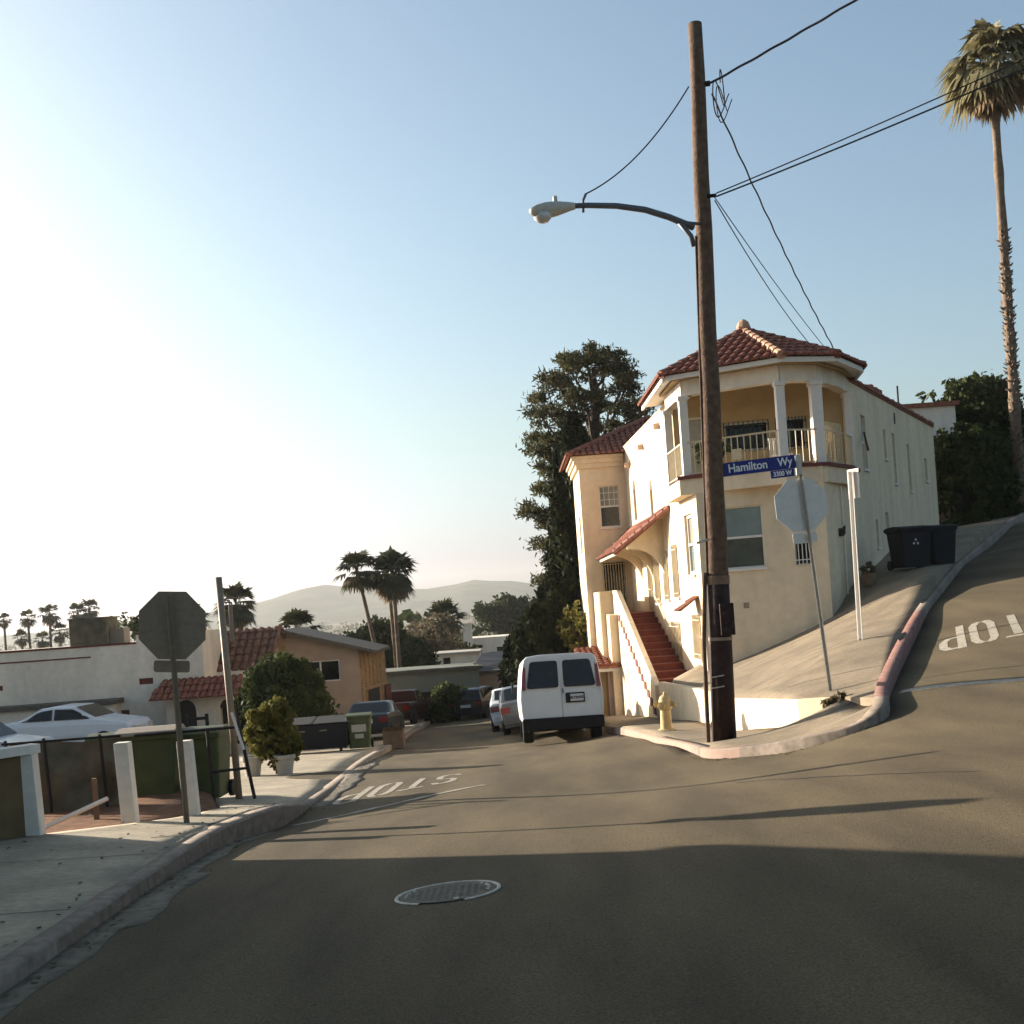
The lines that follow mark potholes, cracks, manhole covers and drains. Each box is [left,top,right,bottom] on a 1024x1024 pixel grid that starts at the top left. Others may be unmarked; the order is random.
manhole cover [394,880,501,905]
